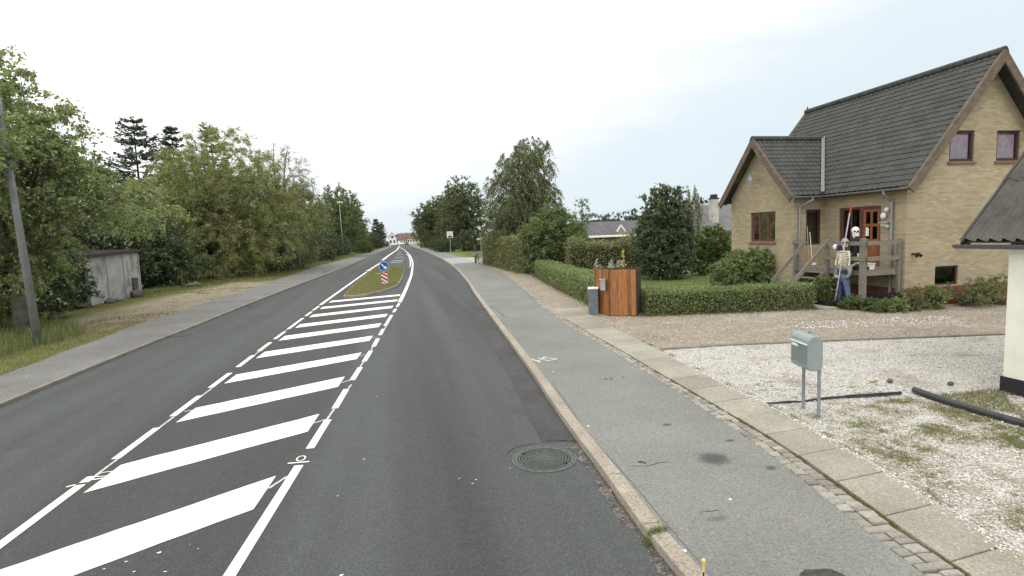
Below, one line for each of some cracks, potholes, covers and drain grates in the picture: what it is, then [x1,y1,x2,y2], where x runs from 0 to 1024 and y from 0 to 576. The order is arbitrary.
manhole cover [512,446,577,473]
